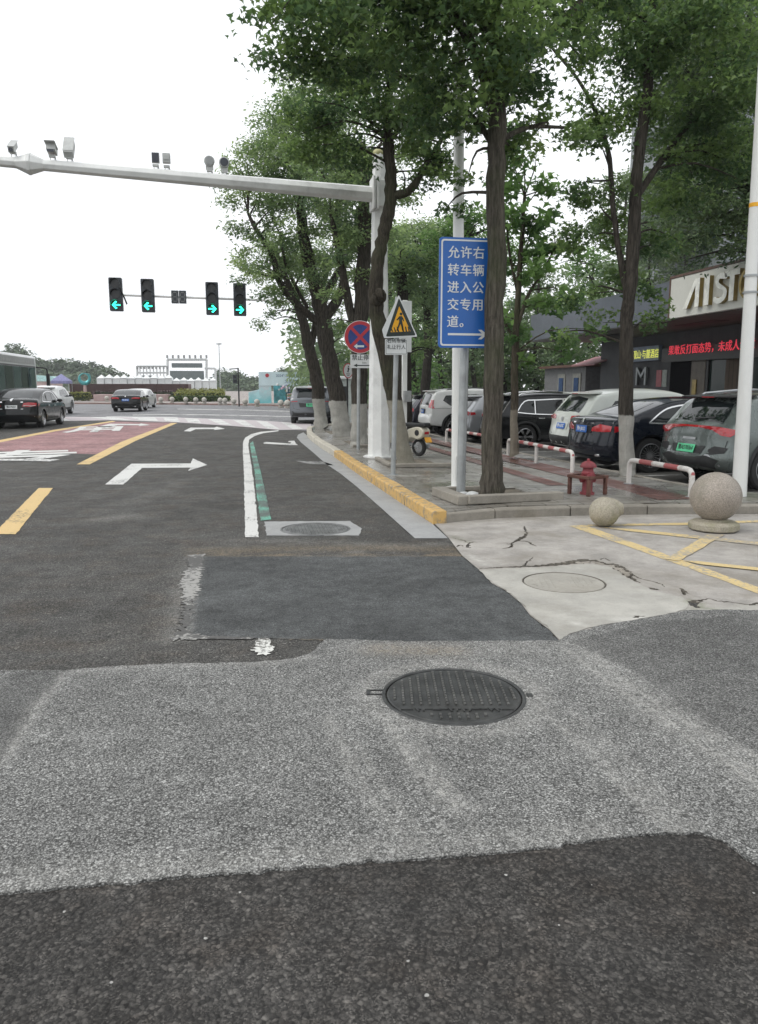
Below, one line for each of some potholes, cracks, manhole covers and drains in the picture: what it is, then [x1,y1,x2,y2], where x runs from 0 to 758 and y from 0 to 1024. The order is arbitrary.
crack [455,526,758,608]
manhole cover [522,572,607,593]
manhole cover [366,668,533,726]
manhole cover [280,522,350,536]
